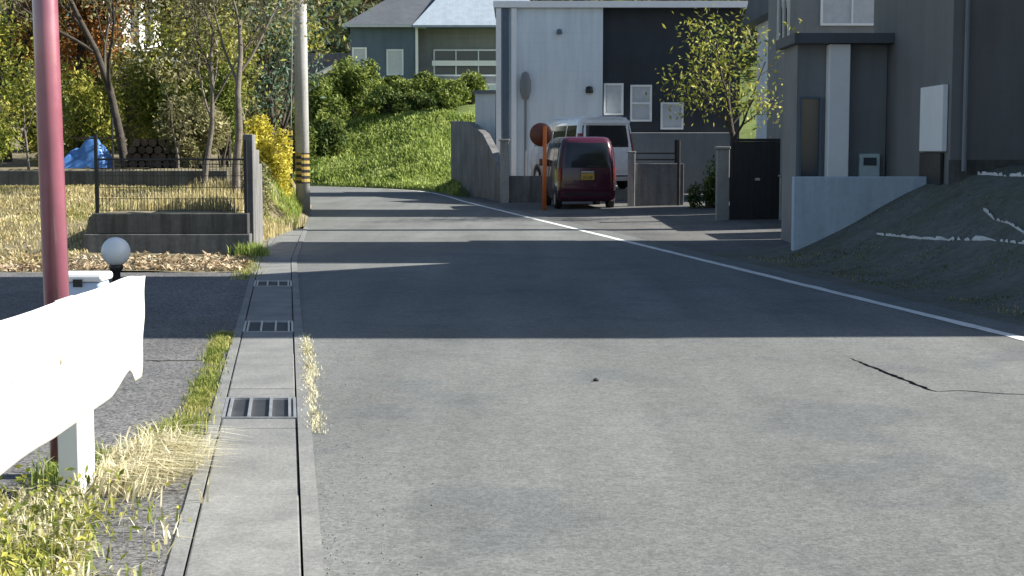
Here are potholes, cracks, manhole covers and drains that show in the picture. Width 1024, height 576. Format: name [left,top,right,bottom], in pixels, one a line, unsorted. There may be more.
drain grate [253,280,292,288]
drain grate [242,321,294,338]
crack [850,358,1024,395]
drain grate [222,397,297,427]
